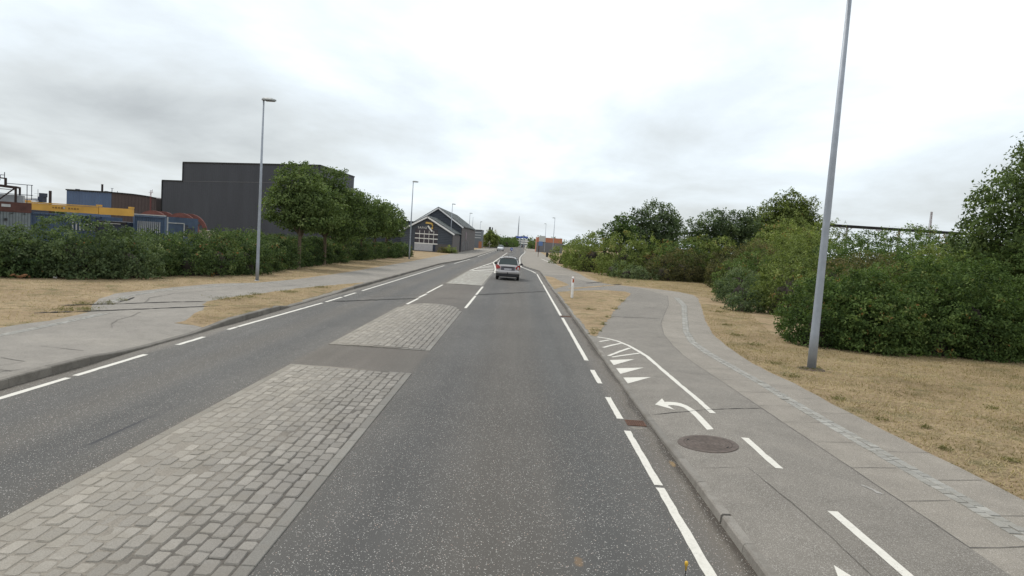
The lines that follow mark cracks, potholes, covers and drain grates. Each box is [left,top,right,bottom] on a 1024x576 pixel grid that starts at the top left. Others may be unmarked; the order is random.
manhole cover [678,435,739,453]
